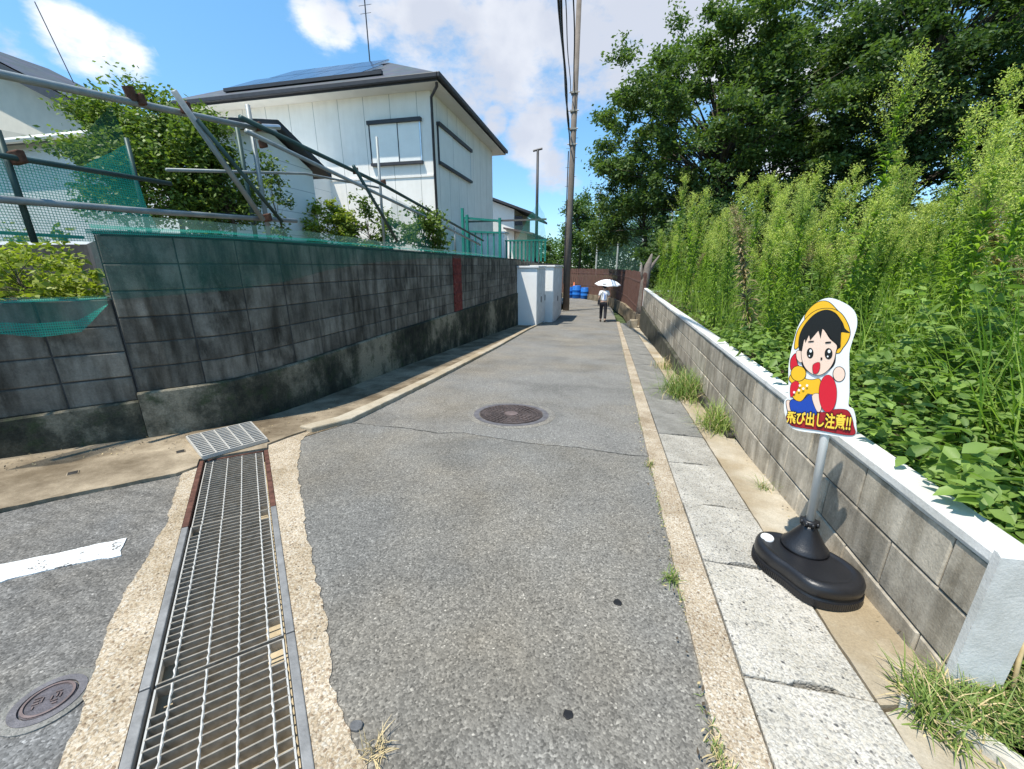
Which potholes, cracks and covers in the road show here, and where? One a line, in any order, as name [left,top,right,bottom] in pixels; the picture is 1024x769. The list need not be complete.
manhole cover [0,668,95,738]
drain grate [186,421,268,460]
drain grate [182,450,277,535]
crack [355,423,633,456]
drain grate [119,632,315,769]
manhole cover [467,402,555,429]
drain grate [139,506,296,702]
